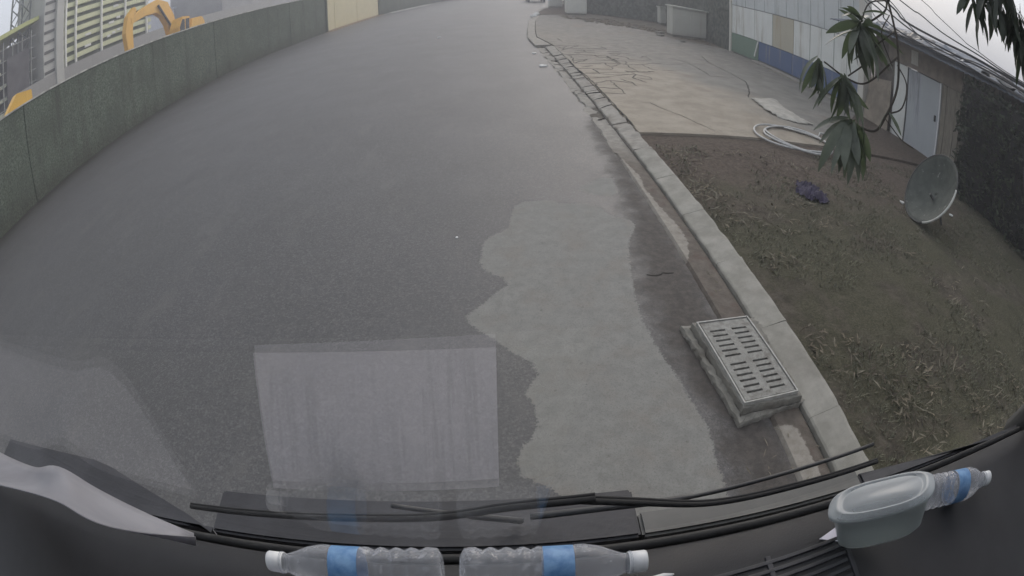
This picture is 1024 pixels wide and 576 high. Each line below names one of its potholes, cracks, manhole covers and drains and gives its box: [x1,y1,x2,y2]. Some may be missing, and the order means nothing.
crack [545,39,670,127]
